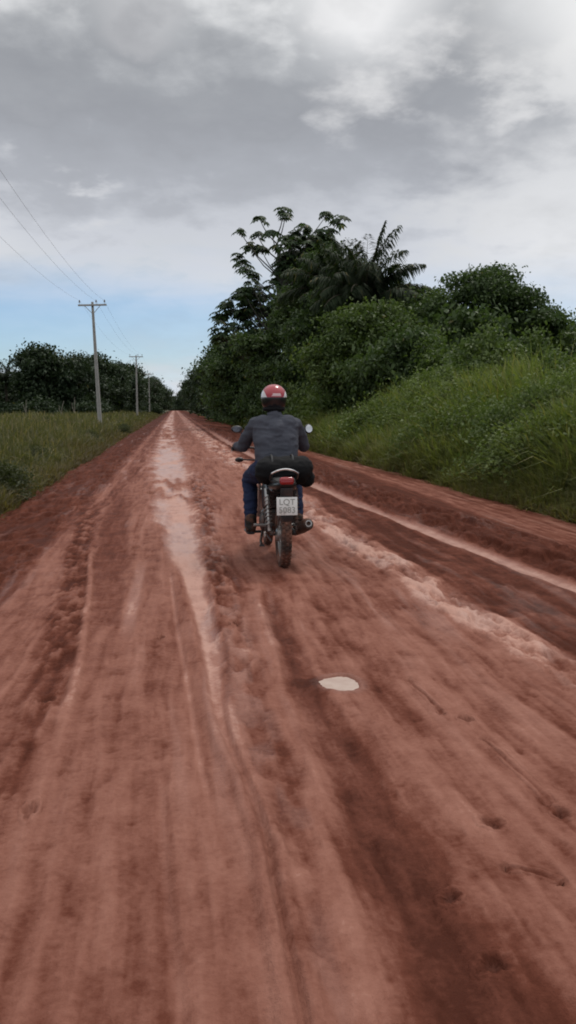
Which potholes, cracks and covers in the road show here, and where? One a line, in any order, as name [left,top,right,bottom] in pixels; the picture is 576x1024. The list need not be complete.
pothole [472,813,511,833]
pothole [547,803,576,823]
crack [506,862,564,886]
pothole [467,948,523,981]
pothole [432,884,469,910]
crack [405,679,446,715]
